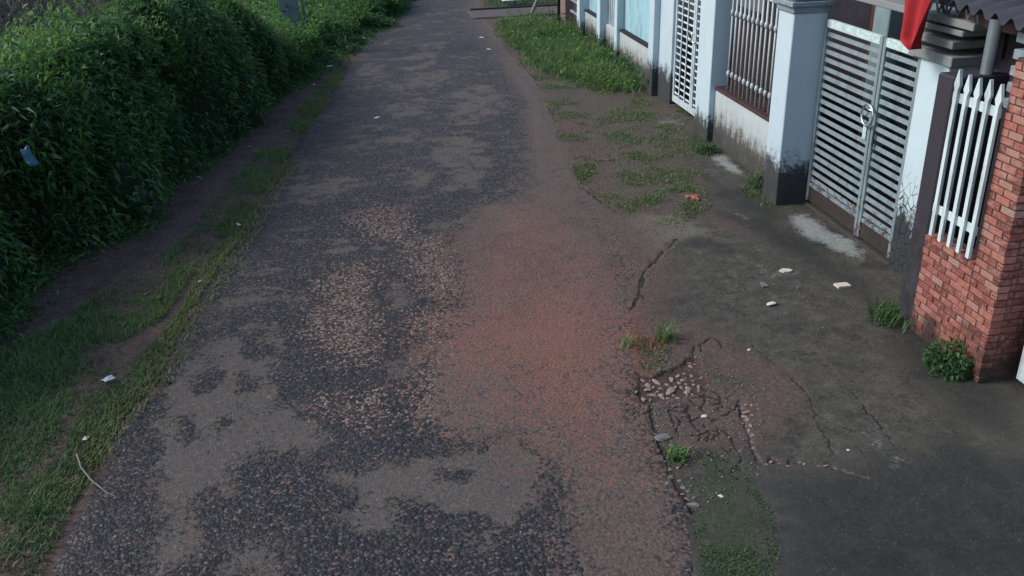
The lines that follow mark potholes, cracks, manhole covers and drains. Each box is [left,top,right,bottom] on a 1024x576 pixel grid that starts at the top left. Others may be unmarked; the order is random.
crack [615,238,678,309]
crack [691,337,723,363]
pothole [634,357,712,405]
crack [648,345,895,515]
